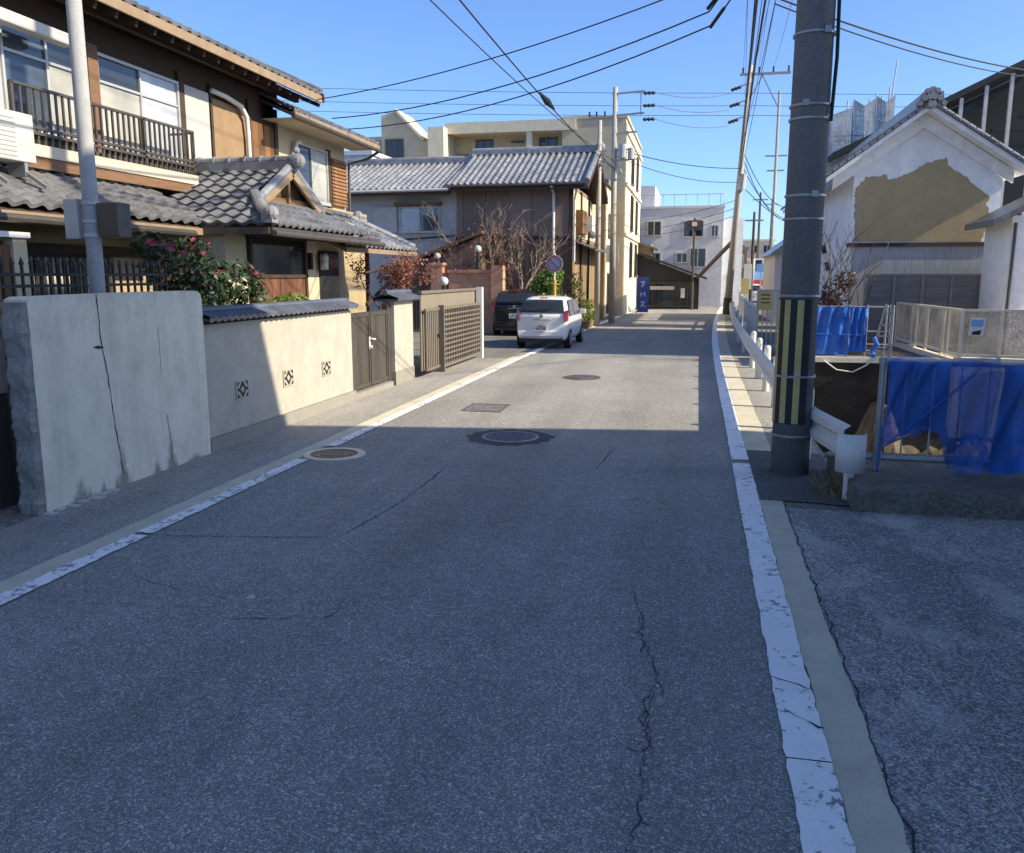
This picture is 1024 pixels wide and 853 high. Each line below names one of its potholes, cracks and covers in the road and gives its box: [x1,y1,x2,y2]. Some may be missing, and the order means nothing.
manhole cover [303,447,365,461]
crack [211,609,338,619]
manhole cover [460,403,511,412]
crack [133,575,244,599]
manhole cover [467,429,555,446]
crack [624,579,664,853]
